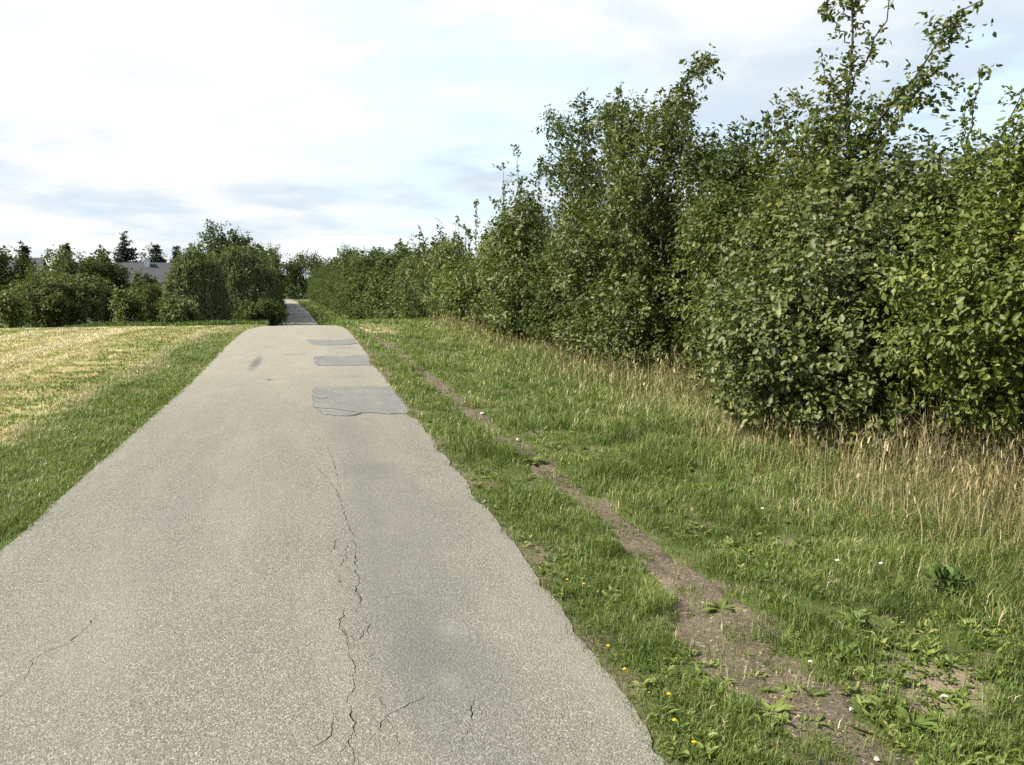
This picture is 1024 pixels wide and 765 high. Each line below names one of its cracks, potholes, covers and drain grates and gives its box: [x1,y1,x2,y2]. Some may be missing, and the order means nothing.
crack [0,617,96,697]
crack [307,467,423,765]
